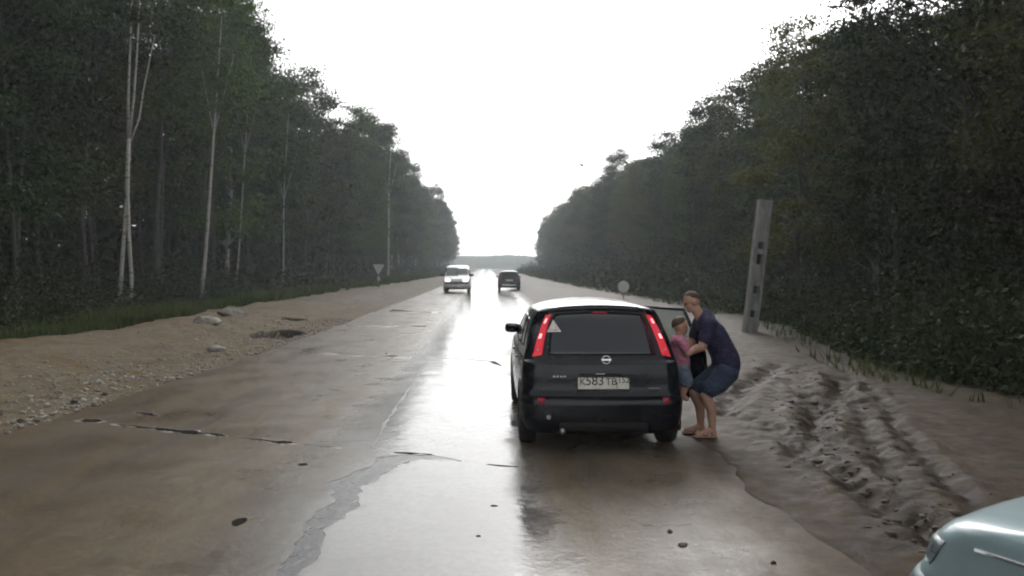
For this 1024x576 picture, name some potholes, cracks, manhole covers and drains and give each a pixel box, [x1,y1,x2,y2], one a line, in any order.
crack [74,412,341,449]
pothole [249,329,306,340]
